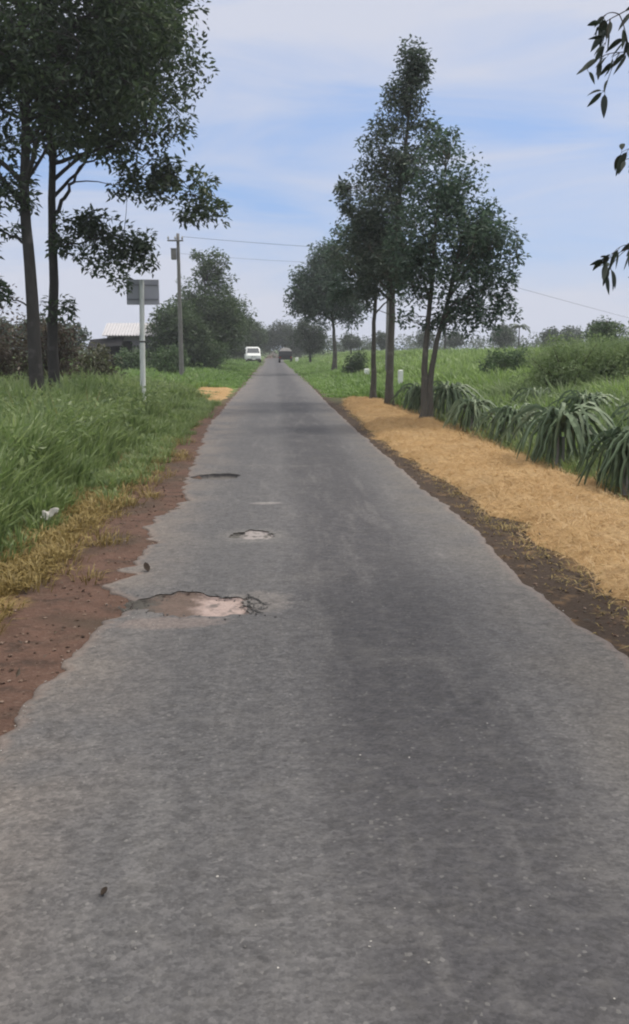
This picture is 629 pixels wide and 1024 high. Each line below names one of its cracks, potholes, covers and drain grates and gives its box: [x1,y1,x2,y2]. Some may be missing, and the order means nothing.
pothole [229,530,275,540]
pothole [116,591,252,617]
